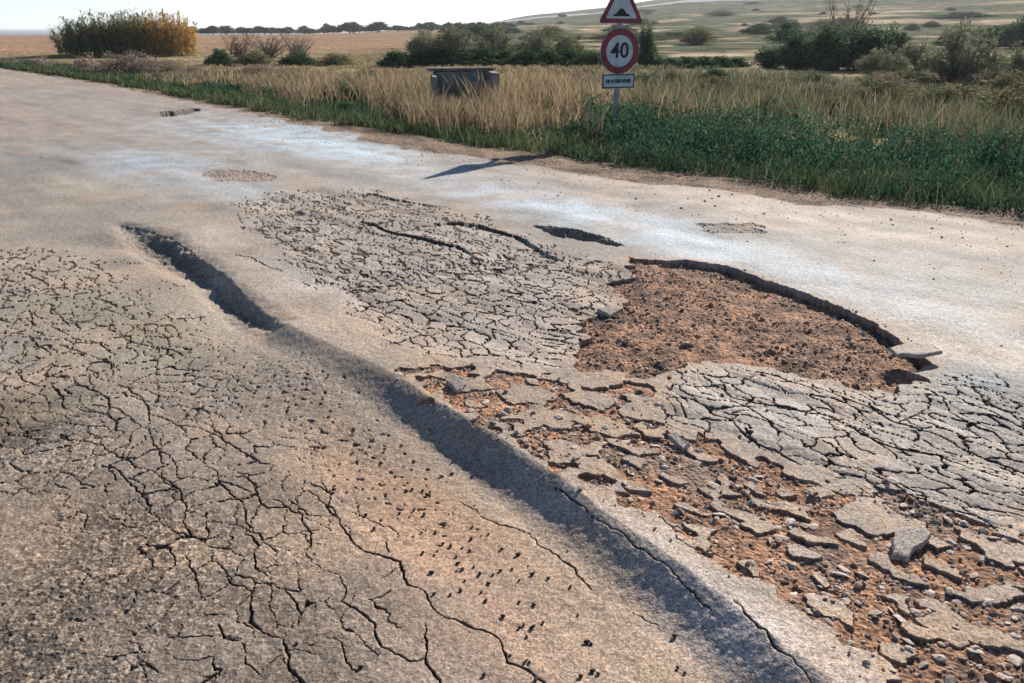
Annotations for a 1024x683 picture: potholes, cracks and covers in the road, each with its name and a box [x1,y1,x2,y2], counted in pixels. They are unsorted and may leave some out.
pothole [394,364,1024,683]
pothole [533,225,624,247]
pothole [152,108,201,117]
crack [229,189,621,378]
crack [0,247,543,683]
crack [462,487,759,625]
pothole [572,257,932,394]
